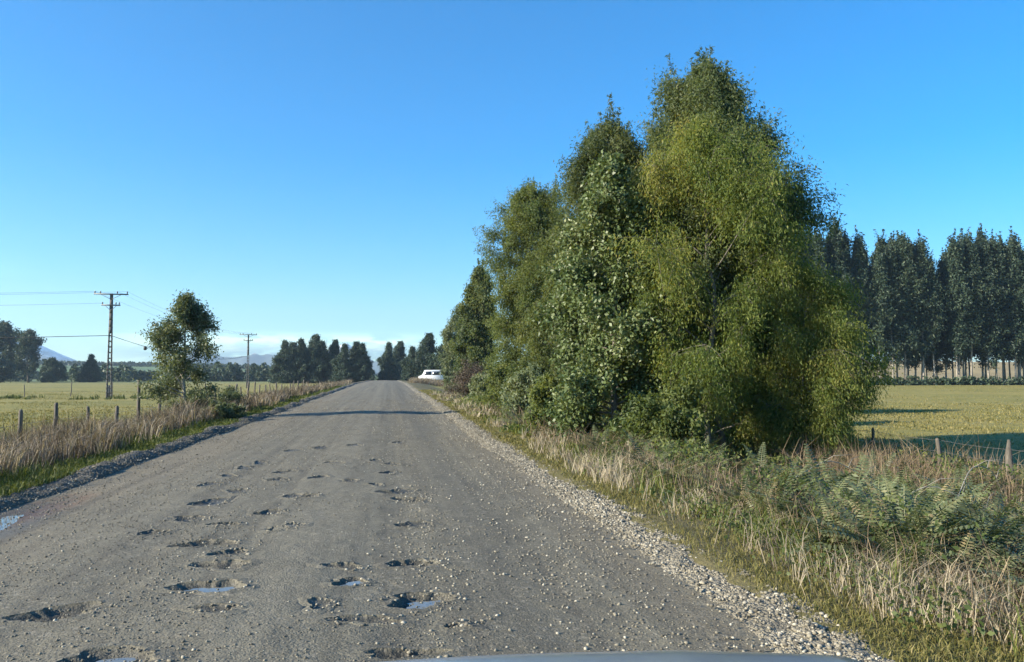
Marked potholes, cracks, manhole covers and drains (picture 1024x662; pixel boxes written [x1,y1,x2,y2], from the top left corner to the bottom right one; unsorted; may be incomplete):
pothole [179,495,237,508]
pothole [375,590,470,614]
pothole [152,538,253,550]
pothole [373,557,452,570]
pothole [384,520,444,529]
pothole [0,597,124,627]
pothole [298,593,343,616]
pothole [246,508,288,517]
pothole [192,547,259,558]
pothole [147,577,261,595]
pothole [128,528,180,537]
pothole [320,575,381,589]
